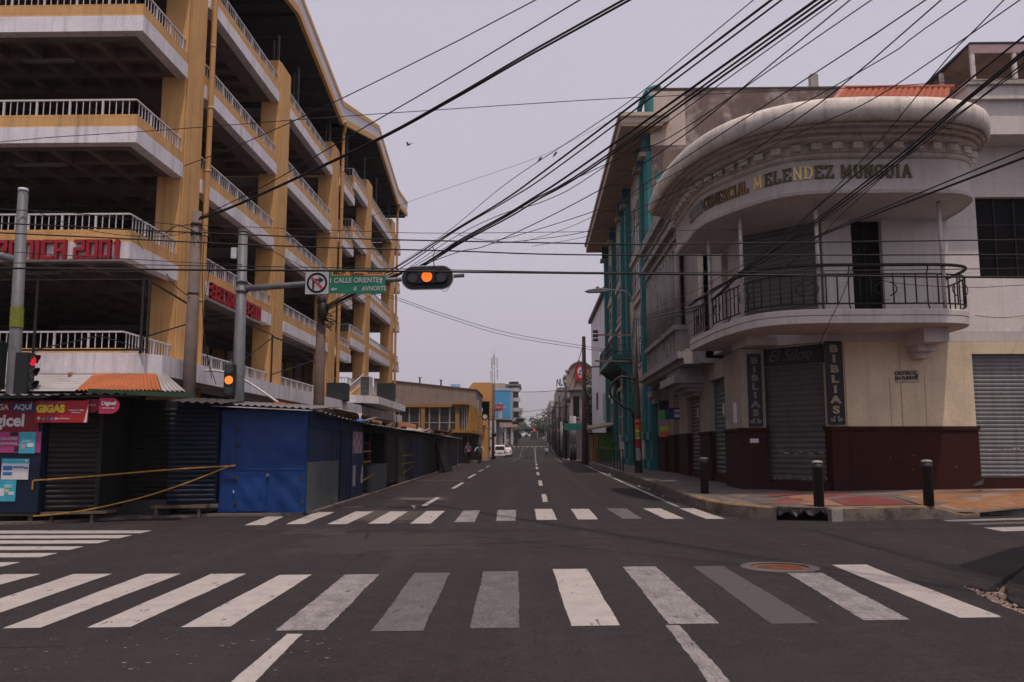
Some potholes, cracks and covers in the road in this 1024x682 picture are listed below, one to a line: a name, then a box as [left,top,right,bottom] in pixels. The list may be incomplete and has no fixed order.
drain grate [775,506,843,522]
manhole cover [740,562,820,572]
